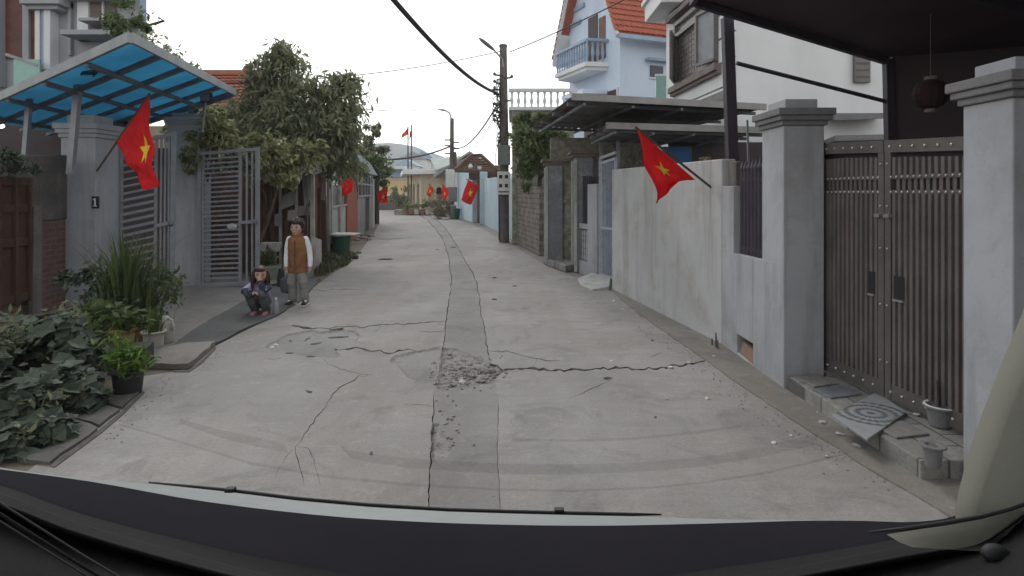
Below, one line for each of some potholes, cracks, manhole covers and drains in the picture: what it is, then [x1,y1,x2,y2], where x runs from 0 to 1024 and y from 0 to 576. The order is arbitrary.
crack [267,321,444,483]
pothole [435,347,504,391]
crack [488,350,705,398]
